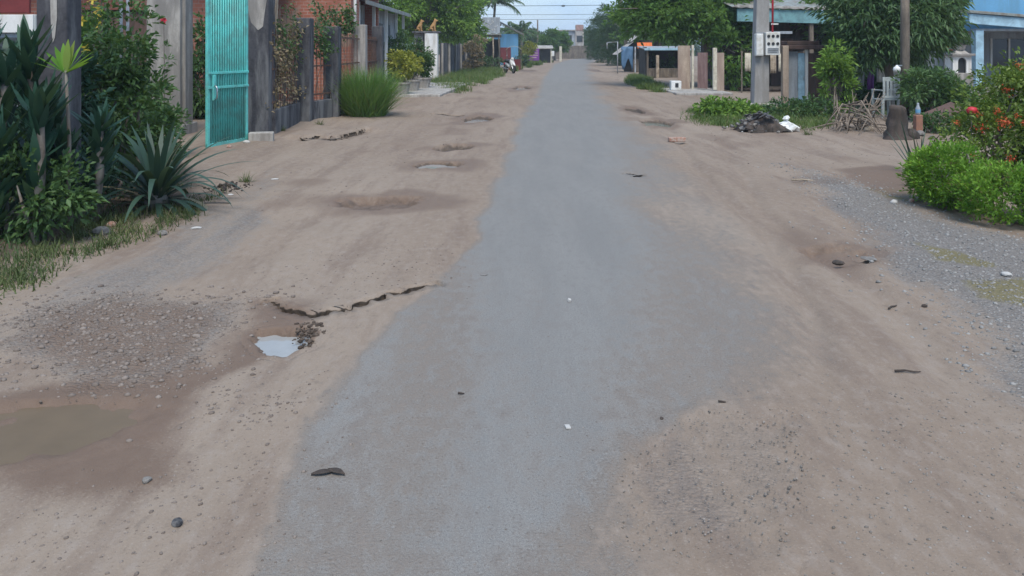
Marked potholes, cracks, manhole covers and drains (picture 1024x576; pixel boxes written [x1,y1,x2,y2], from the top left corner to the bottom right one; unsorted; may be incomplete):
crack [294,129,375,143]
pothole [422,142,486,154]
pothole [315,193,440,213]
pothole [452,114,503,124]
pothole [399,160,475,171]
crack [255,281,445,323]
pothole [631,118,684,130]
pothole [616,106,652,115]
pothole [239,323,333,363]
pothole [0,387,203,476]
